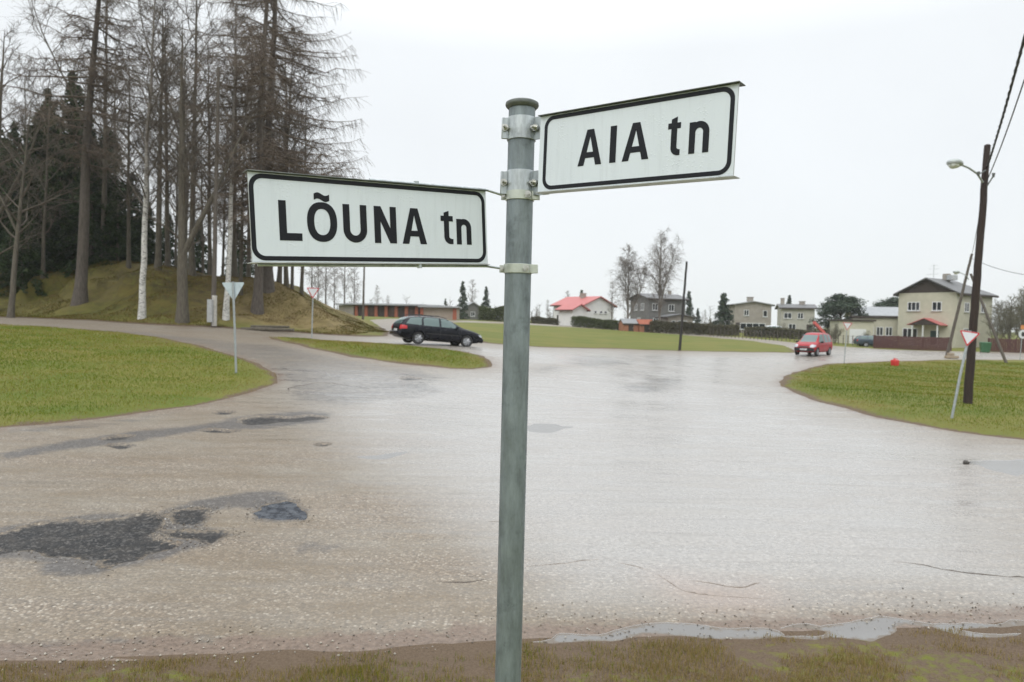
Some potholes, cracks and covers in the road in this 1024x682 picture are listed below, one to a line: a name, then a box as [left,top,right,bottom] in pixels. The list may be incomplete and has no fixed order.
crack [622,563,768,599]
crack [895,561,1022,577]
